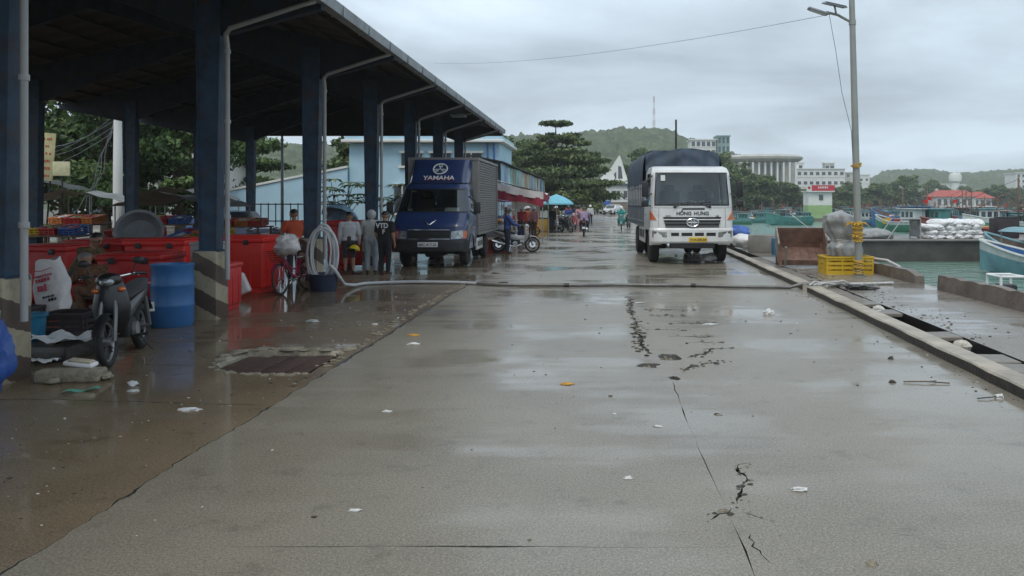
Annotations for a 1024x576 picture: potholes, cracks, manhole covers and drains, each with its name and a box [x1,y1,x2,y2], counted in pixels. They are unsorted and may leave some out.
crack [625,296,734,372]
crack [707,463,773,561]
manhole cover [207,346,357,376]
